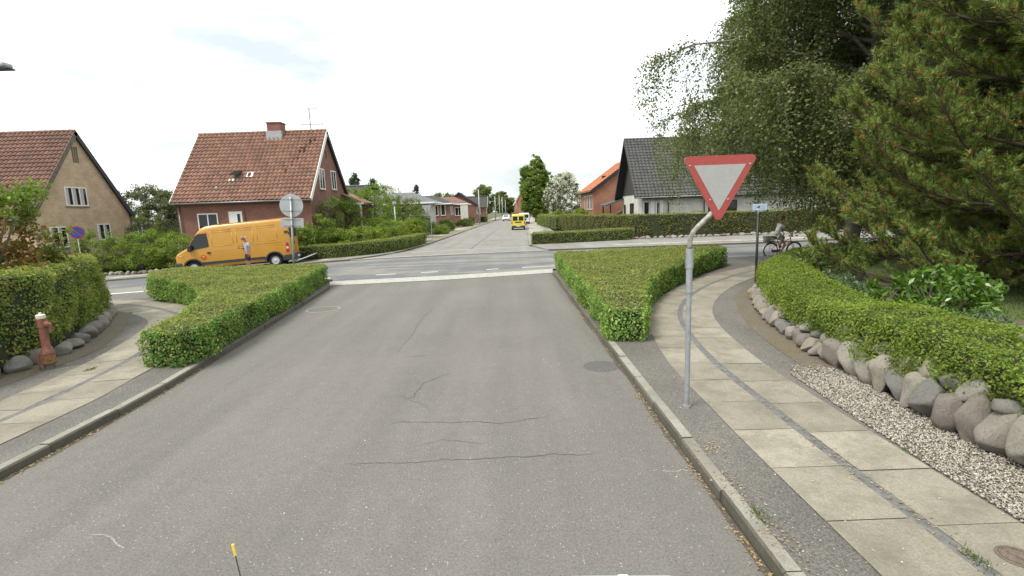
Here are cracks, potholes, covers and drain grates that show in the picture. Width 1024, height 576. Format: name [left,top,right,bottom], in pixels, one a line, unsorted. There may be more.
manhole cover [994,545,1024,568]
manhole cover [583,361,618,372]
crack [349,374,593,464]
